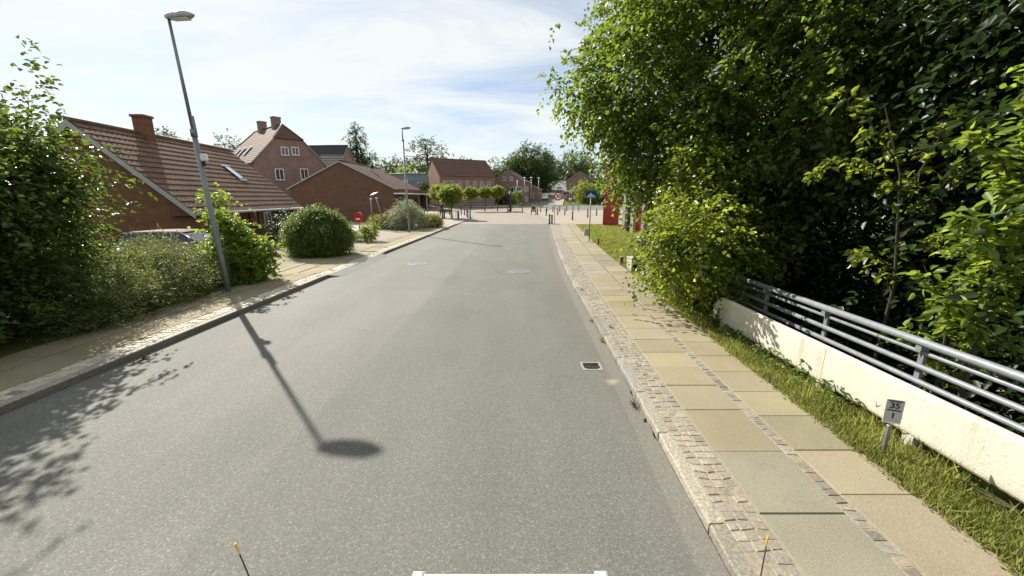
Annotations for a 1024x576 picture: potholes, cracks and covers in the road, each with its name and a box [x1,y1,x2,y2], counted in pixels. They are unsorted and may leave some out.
drain grate [580,362,604,370]
